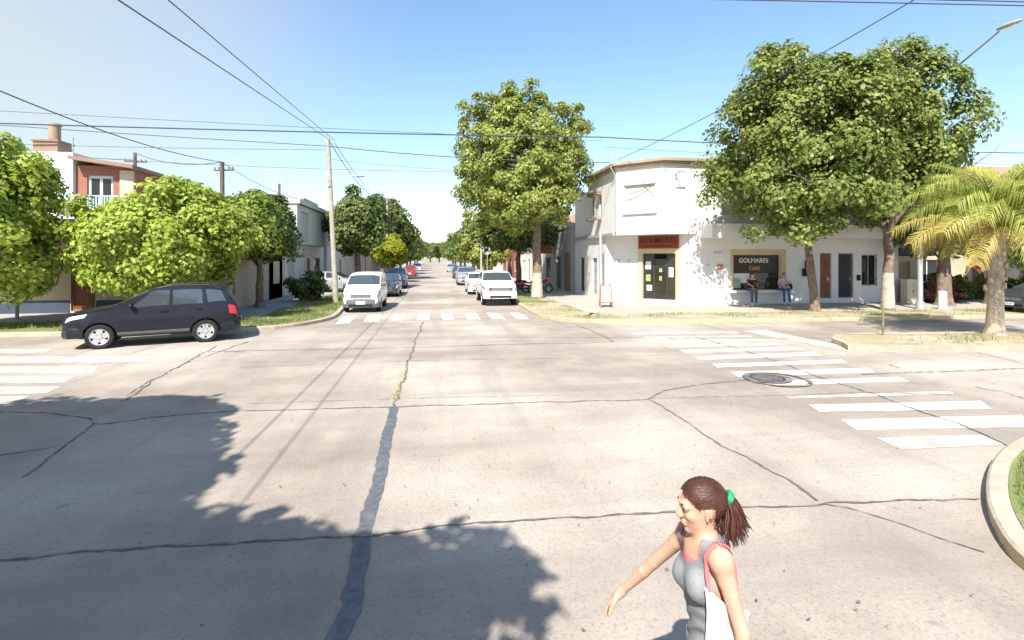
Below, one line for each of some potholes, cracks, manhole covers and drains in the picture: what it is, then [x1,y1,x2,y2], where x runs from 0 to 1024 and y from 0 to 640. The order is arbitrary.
crack [0,411,95,477]
manhole cover [742,372,813,387]
crack [391,322,423,406]
crack [120,341,248,402]
